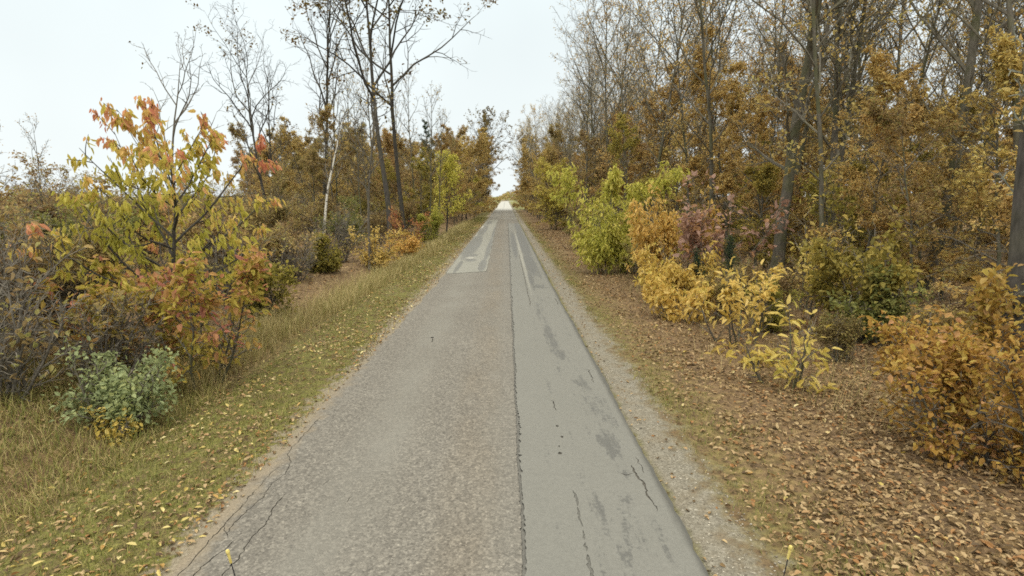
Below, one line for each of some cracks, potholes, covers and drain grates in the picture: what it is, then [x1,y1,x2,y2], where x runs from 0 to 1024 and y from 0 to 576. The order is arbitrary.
crack [573,491,594,576]
crack [177,420,318,576]
crack [624,458,658,511]
